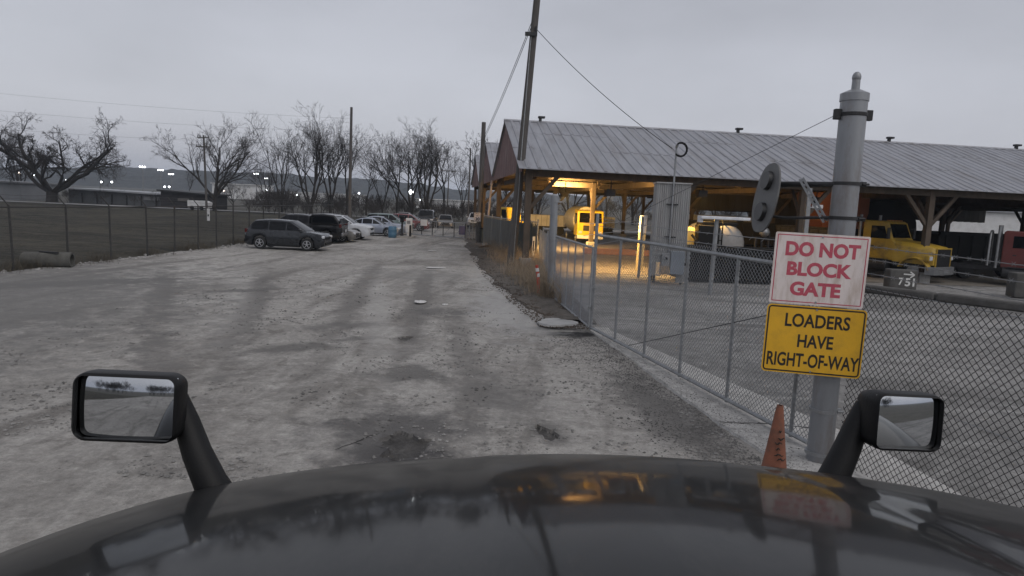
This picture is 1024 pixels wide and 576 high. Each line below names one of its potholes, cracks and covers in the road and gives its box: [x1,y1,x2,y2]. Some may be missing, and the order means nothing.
pothole [531,422,564,444]
pothole [372,427,439,462]
